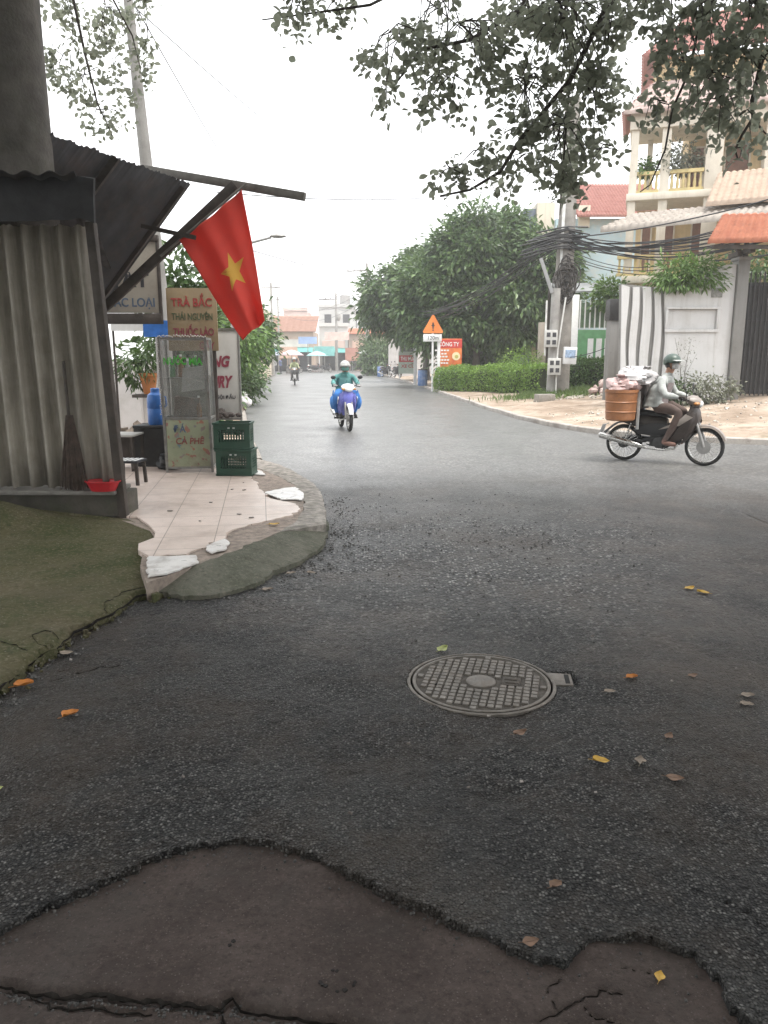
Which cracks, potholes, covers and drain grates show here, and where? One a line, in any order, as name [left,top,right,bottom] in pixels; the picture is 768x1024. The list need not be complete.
crack [540,982,623,1023]
crack [0,986,337,1024]
pothole [0,824,767,1024]
manhole cover [407,653,573,718]
